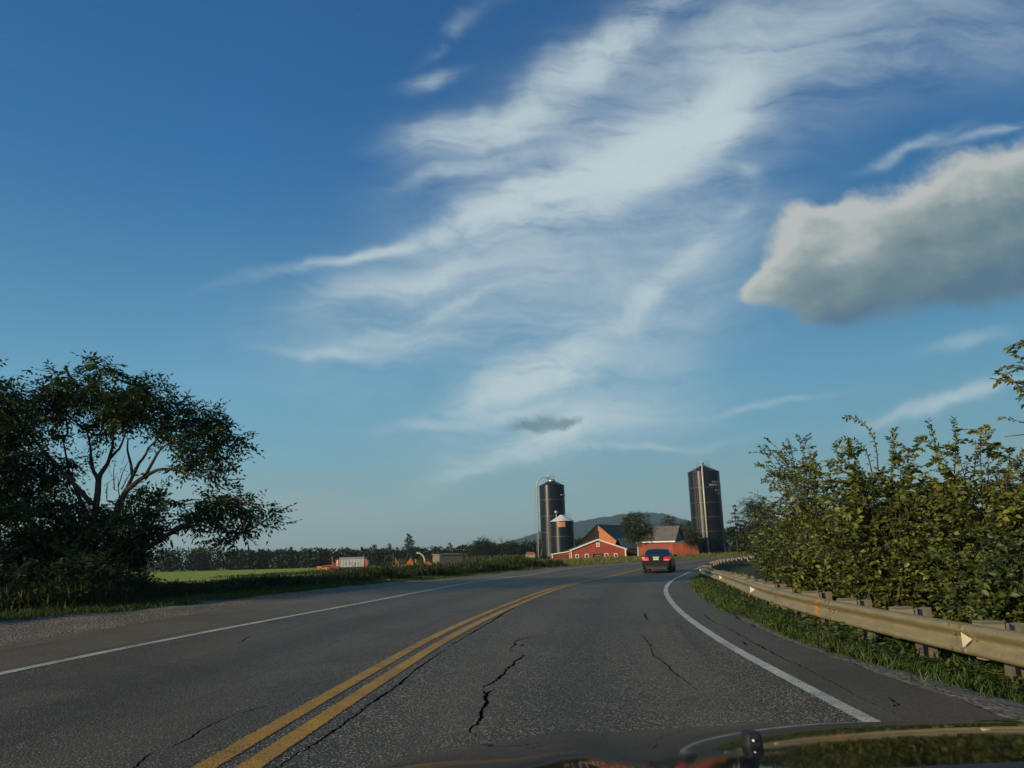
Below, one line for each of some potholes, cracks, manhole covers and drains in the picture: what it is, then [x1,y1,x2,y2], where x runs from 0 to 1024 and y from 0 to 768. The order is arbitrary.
crack [704,614,920,722]
crack [133,705,268,768]
crack [468,636,538,738]
crack [639,612,703,692]
